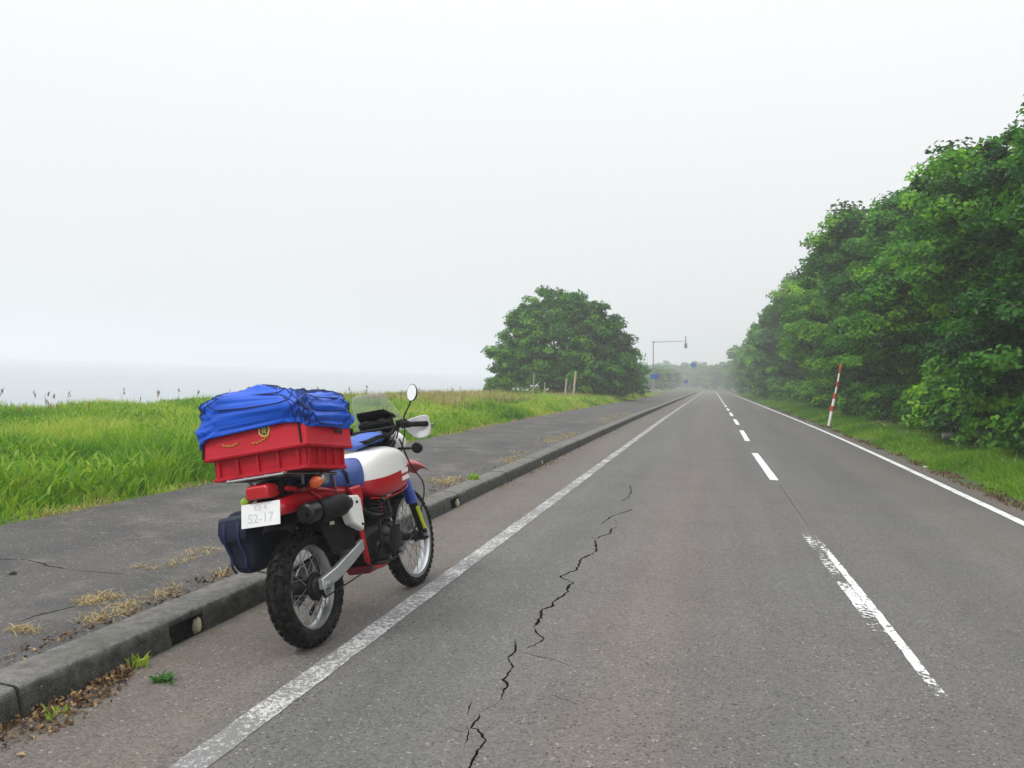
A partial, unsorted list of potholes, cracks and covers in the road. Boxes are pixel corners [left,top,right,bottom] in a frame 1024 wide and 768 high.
crack [0,559,125,575]
crack [450,486,632,768]
